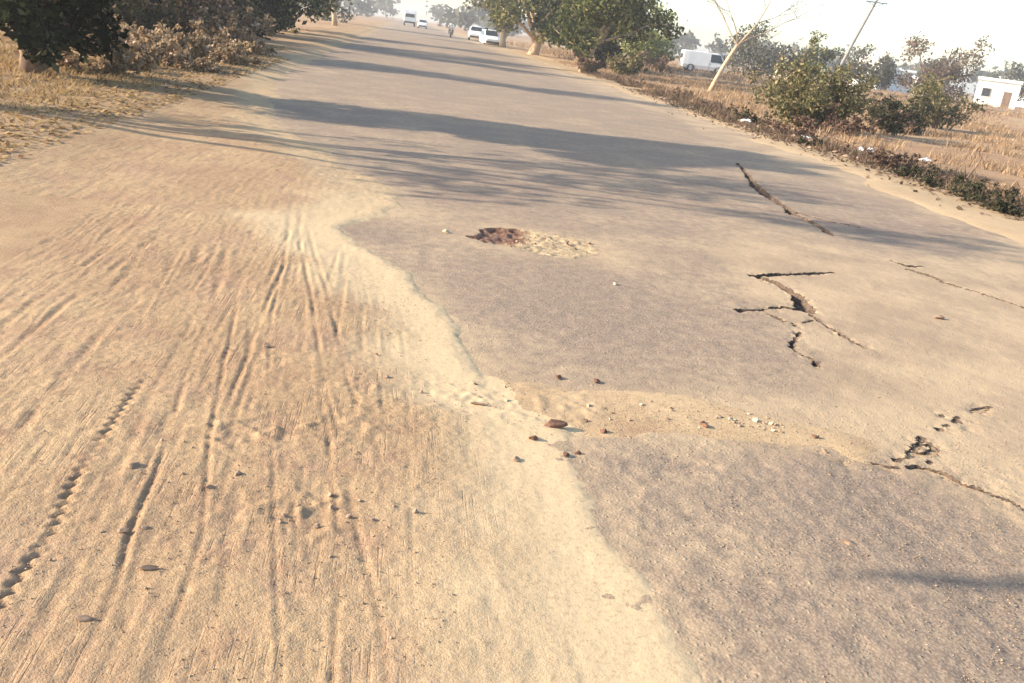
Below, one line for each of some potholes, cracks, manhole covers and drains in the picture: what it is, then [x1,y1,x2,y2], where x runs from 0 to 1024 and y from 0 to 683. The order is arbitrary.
crack [869,406,1024,510]
crack [889,260,1024,308]
crack [733,272,867,369]
crack [736,163,861,236]
pothole [465,227,601,259]
